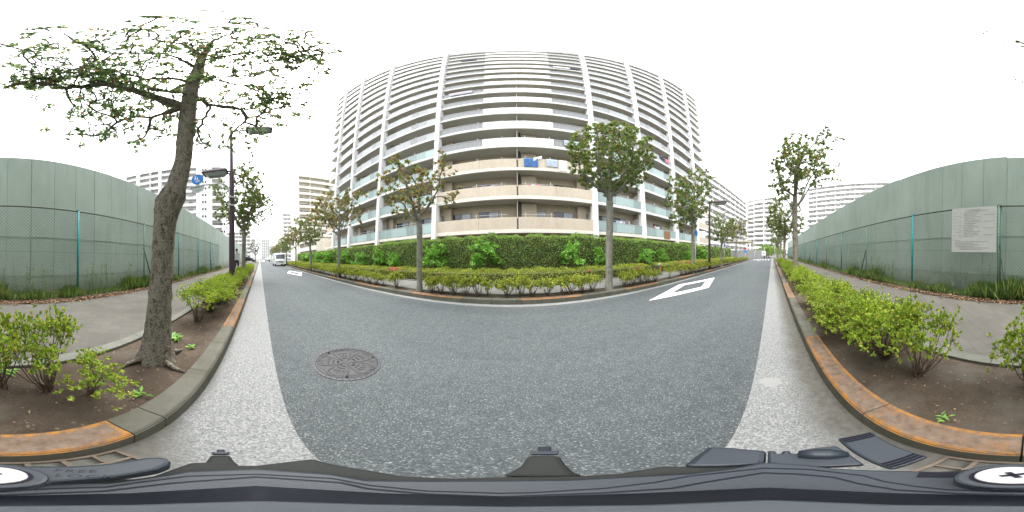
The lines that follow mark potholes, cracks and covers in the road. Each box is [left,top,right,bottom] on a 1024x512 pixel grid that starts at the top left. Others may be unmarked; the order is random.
manhole cover [313,348,381,381]
